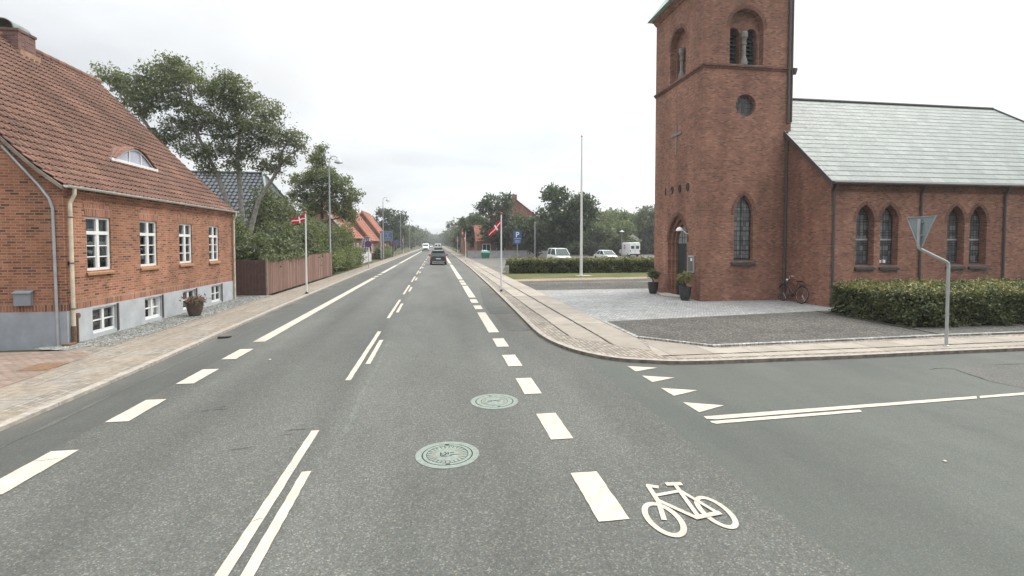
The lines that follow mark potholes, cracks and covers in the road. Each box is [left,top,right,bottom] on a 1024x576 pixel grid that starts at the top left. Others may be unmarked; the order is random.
manhole cover [415,441,479,469]
manhole cover [471,394,518,409]
